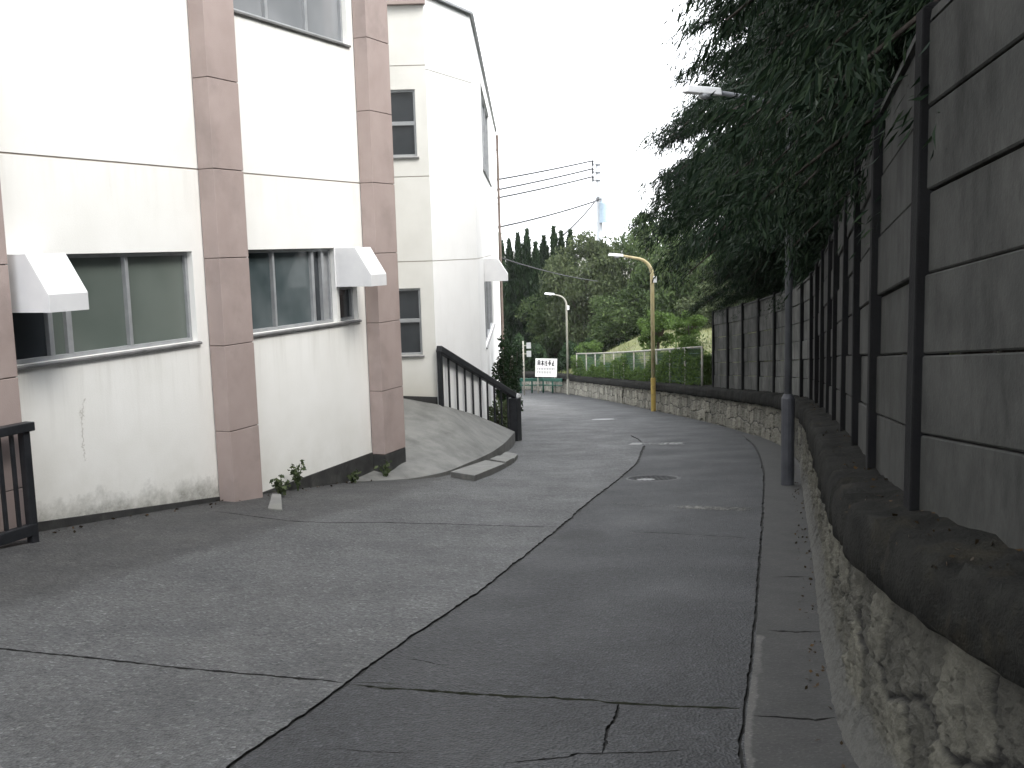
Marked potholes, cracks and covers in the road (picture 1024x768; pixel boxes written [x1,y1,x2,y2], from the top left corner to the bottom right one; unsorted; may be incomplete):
crack [0,439,835,768]
